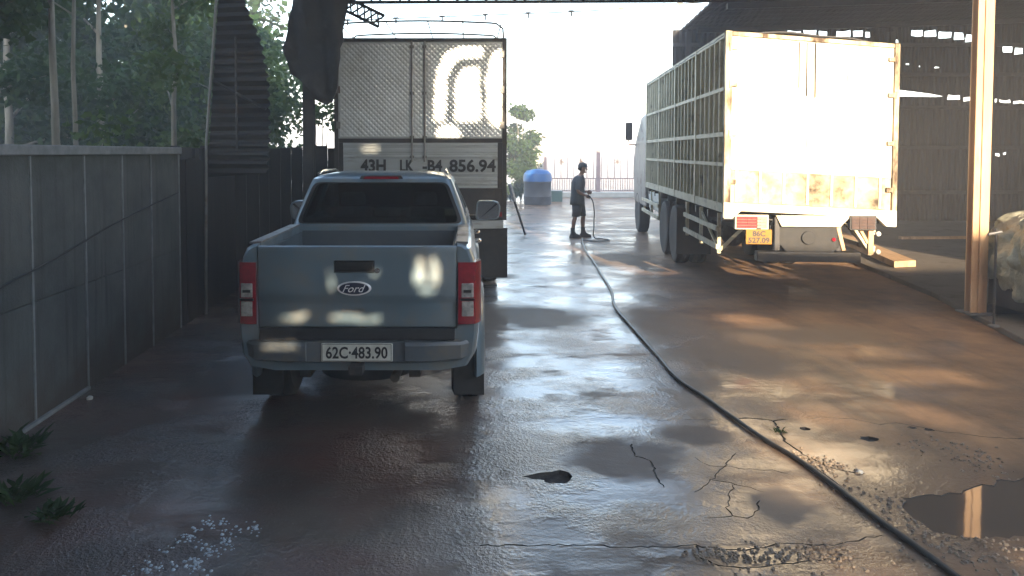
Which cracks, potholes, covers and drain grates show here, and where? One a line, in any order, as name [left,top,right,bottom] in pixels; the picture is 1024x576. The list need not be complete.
crack [630,444,664,487]
crack [480,535,882,569]
pothole [523,470,572,484]
crack [695,417,865,518]
pothole [901,478,1024,538]
